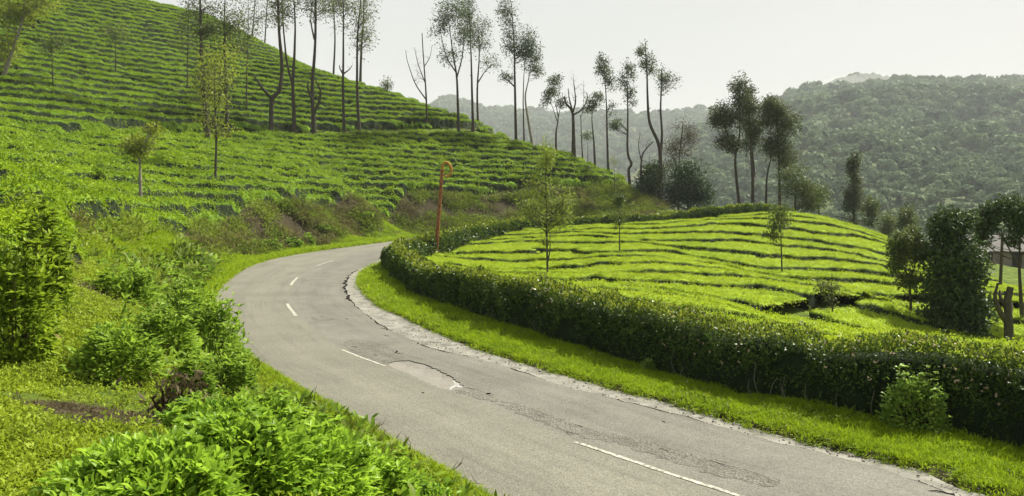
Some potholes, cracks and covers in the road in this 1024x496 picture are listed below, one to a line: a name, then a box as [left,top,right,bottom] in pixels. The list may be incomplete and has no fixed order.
crack [342,270,400,354]
